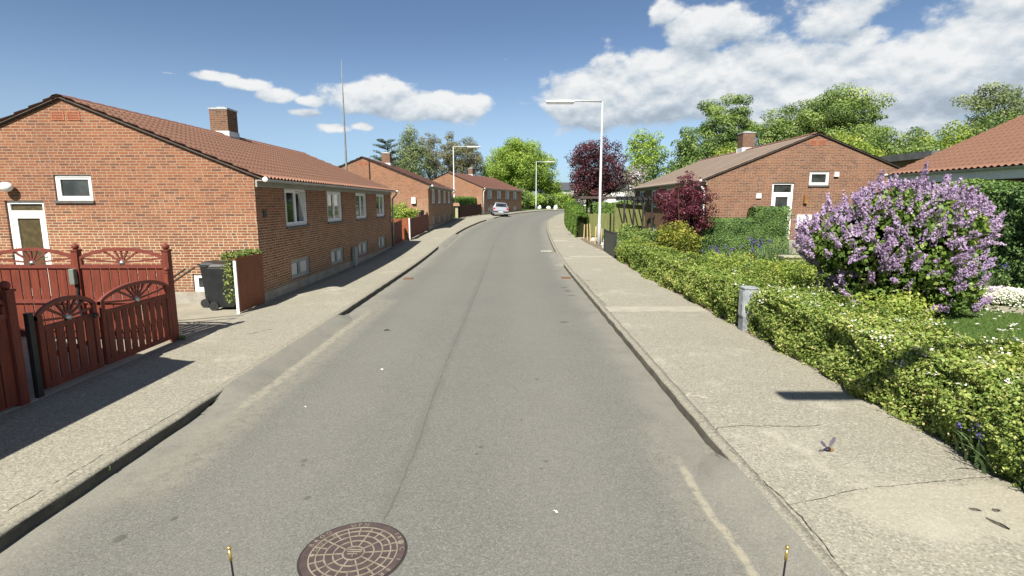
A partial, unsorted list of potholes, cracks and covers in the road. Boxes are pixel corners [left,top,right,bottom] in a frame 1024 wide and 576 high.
manhole cover [297,522,407,576]
